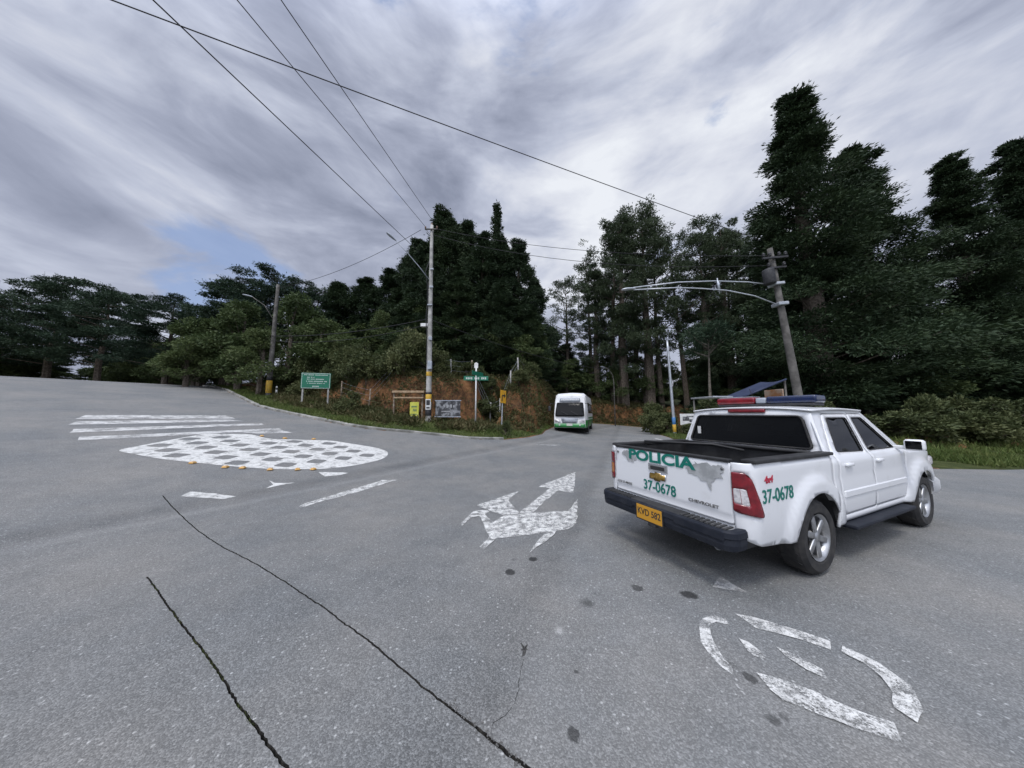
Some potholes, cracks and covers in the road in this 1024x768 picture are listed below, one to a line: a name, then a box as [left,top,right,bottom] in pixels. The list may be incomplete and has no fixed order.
crack [147,496,531,768]
